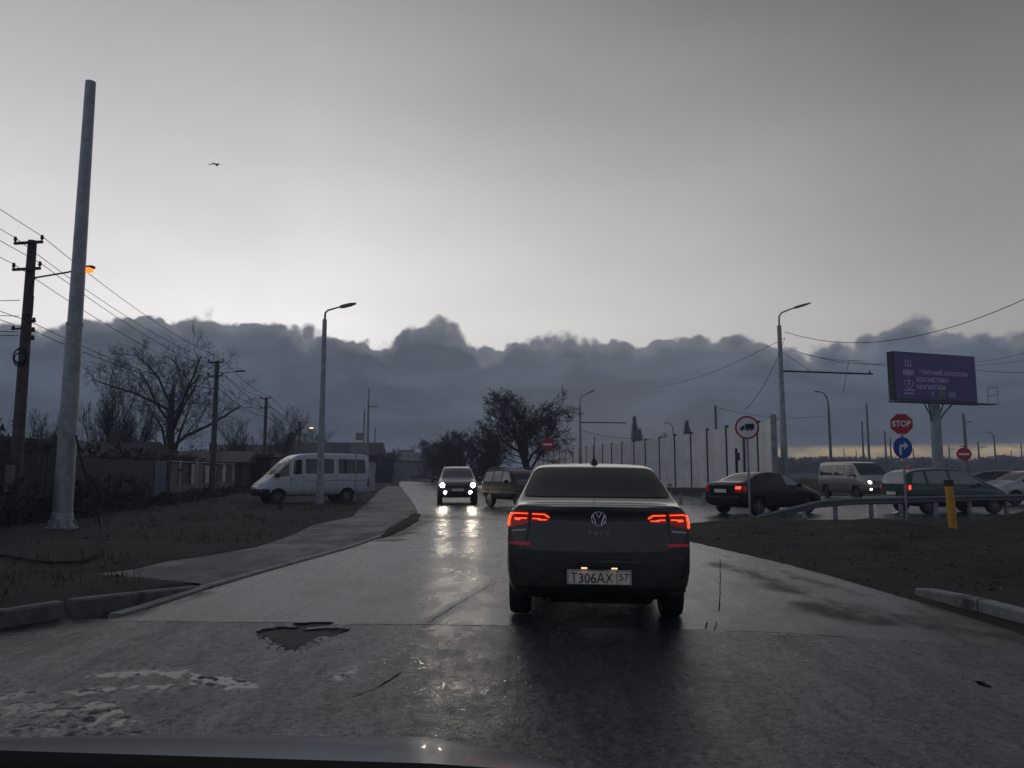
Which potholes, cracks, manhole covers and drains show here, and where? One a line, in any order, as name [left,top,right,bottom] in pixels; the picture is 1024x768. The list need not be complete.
crack [354,672,401,697]
pothole [255,622,350,651]
crack [705,556,735,631]
